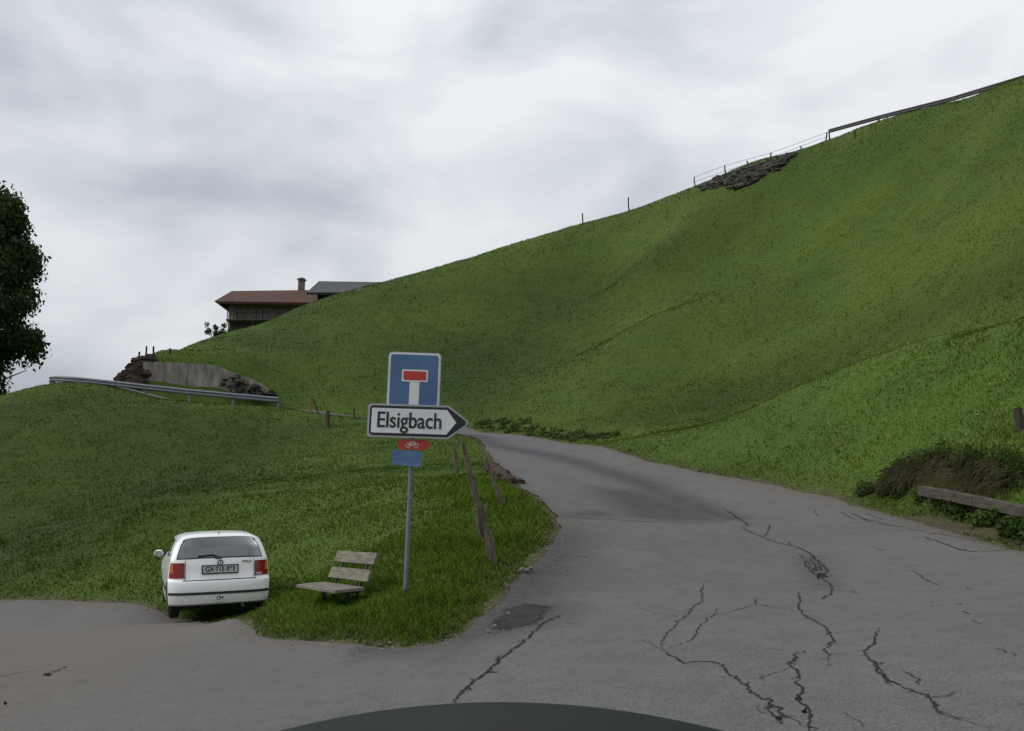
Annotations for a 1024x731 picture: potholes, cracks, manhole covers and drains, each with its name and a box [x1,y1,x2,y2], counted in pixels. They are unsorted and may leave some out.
crack [637,528,857,731]
crack [453,613,574,703]
crack [840,511,1021,551]
crack [858,627,991,729]
